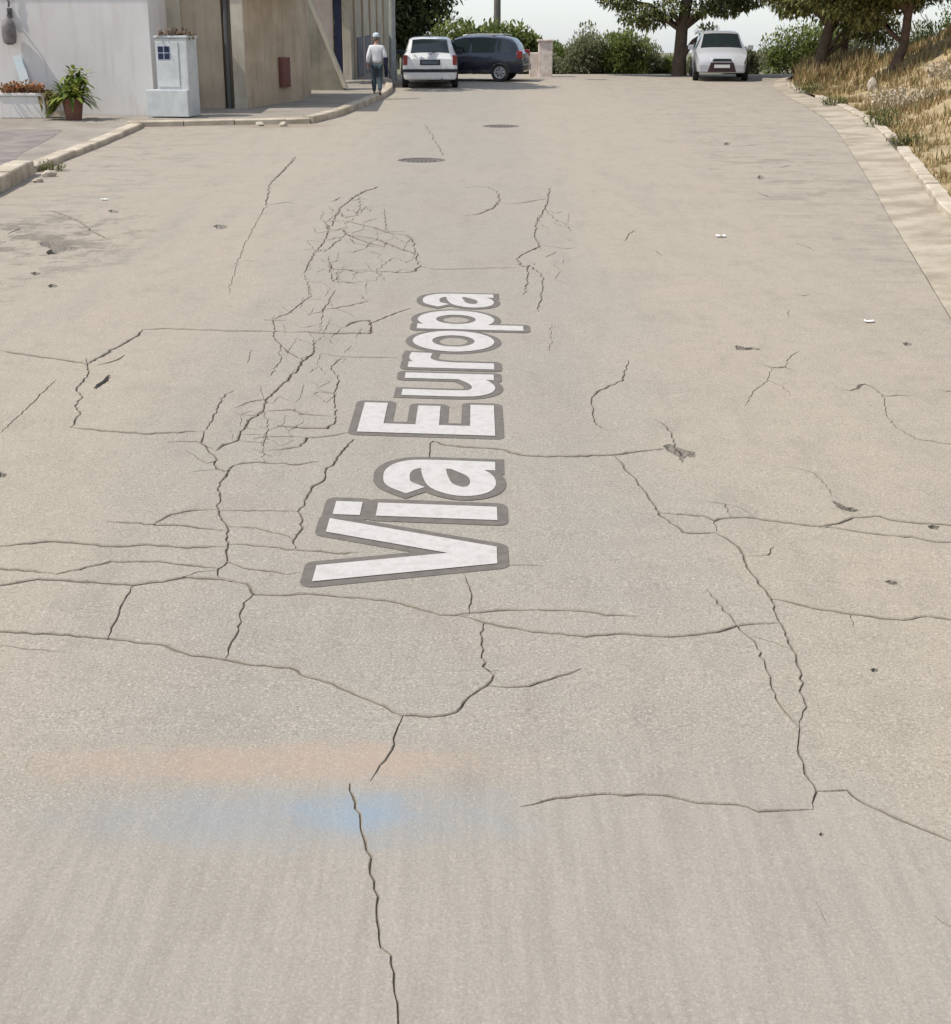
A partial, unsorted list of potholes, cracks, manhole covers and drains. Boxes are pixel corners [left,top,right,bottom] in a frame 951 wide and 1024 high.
crack [745,352,797,405]
pothole [833,501,860,512]
crack [464,186,544,216]
pothole [663,444,696,463]
crack [349,784,400,1024]
crack [838,384,951,445]
crack [516,188,577,352]
crack [429,419,951,841]
crack [1,380,56,433]
crack [304,187,516,293]
crack [590,362,630,431]
